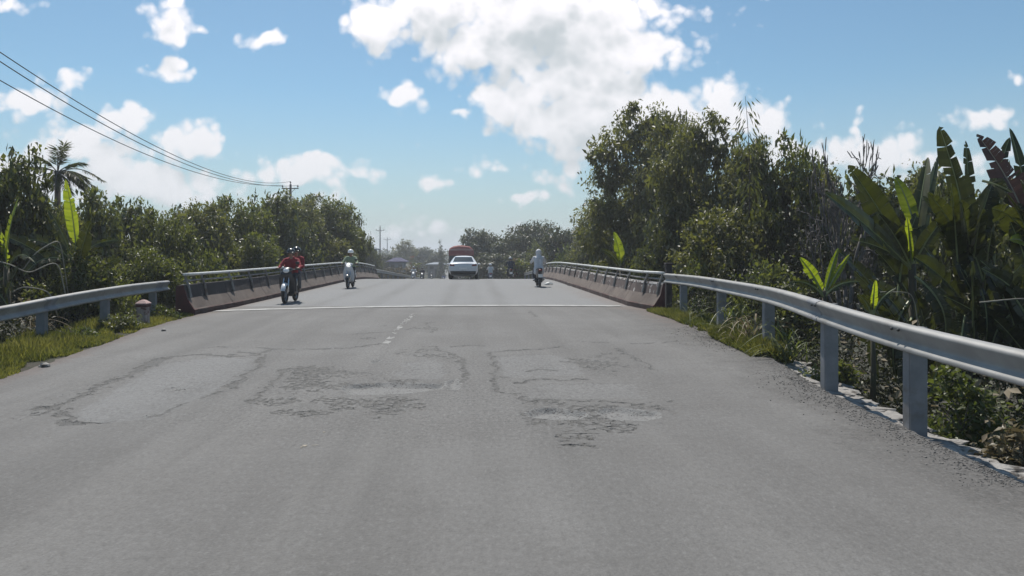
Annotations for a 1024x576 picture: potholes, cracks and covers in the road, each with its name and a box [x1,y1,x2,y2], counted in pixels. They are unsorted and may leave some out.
pothole [595,406,663,421]
crack [28,322,679,449]
pothole [524,407,590,421]
